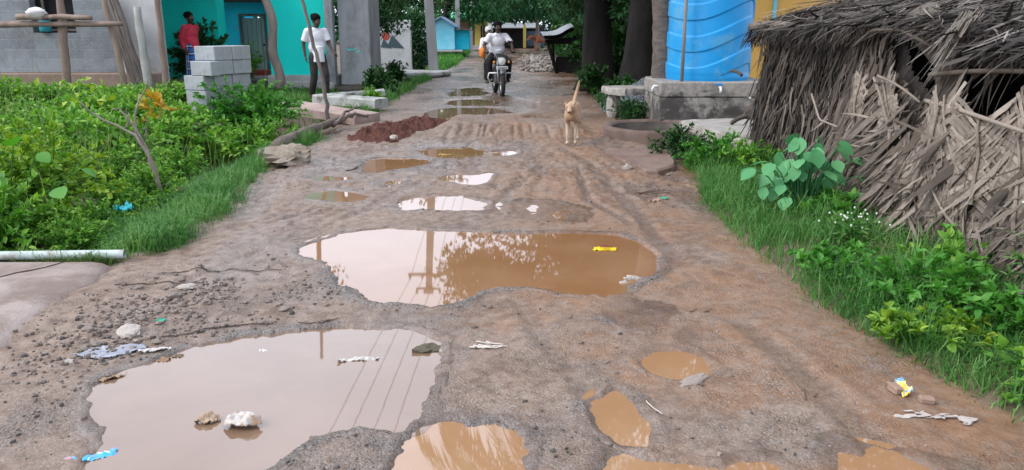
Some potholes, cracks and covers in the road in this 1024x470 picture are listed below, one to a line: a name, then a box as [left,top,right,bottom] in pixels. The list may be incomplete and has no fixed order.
crack [114,267,282,285]
pothole [441,86,493,97]
pothole [579,382,671,452]
pothole [376,411,545,470]
pothole [297,188,379,203]
pothole [387,192,497,213]
pothole [575,446,811,470]
pothole [808,431,977,470]
pothole [483,149,523,157]
pothole [432,172,500,186]
pothole [357,156,438,174]
pothole [290,225,672,311]
